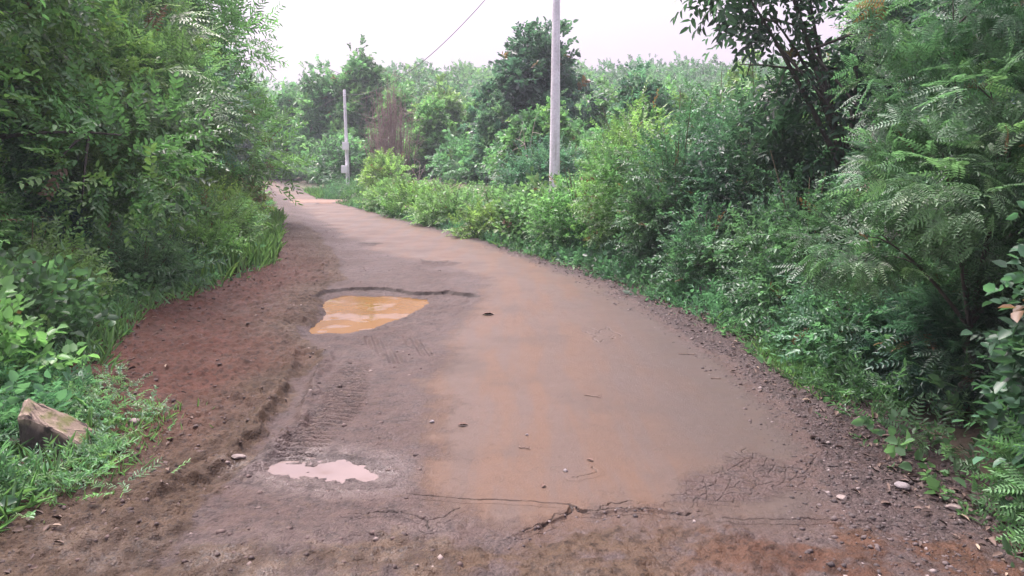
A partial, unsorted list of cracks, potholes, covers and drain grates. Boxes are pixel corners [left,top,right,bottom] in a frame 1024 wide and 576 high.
pothole [234,449,403,490]
crack [339,439,908,539]
pothole [274,285,489,340]
